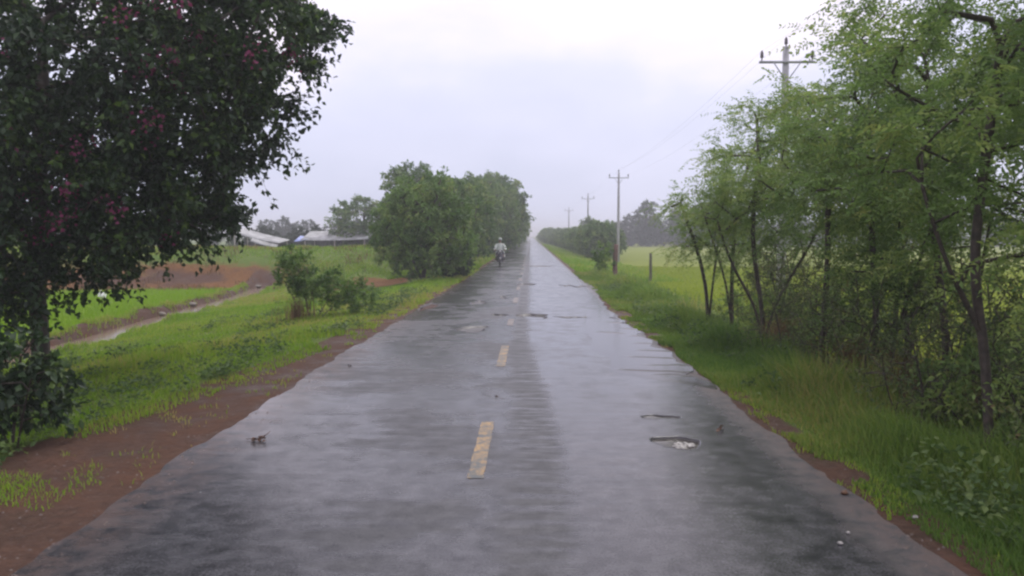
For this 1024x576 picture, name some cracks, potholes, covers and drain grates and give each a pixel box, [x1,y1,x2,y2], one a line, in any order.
pothole [649,436,702,450]
